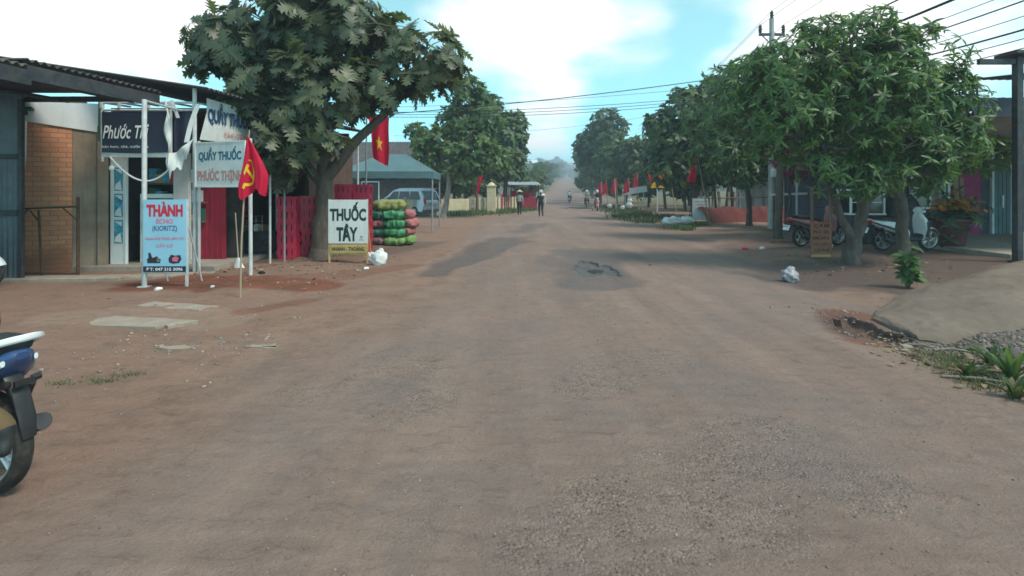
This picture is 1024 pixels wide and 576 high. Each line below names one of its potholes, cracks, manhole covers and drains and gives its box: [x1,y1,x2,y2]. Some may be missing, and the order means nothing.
pothole [553,256,646,284]
pothole [799,309,978,369]
